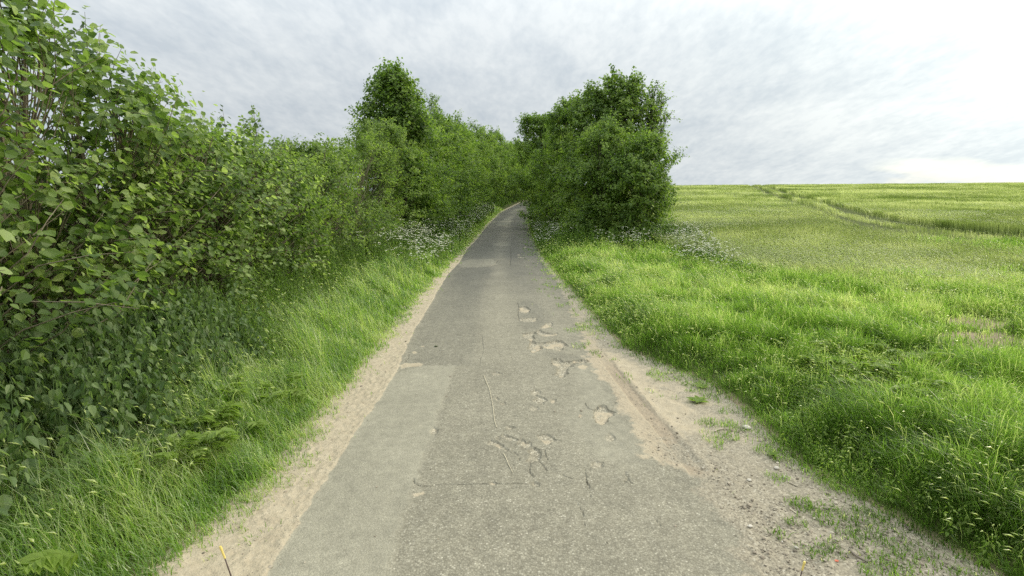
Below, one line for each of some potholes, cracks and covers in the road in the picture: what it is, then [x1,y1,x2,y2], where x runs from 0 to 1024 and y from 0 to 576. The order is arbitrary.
crack [413,439,593,526]
pothole [551,358,589,378]
pothole [530,389,548,404]
pothole [592,405,615,425]
pothole [522,332,569,353]
